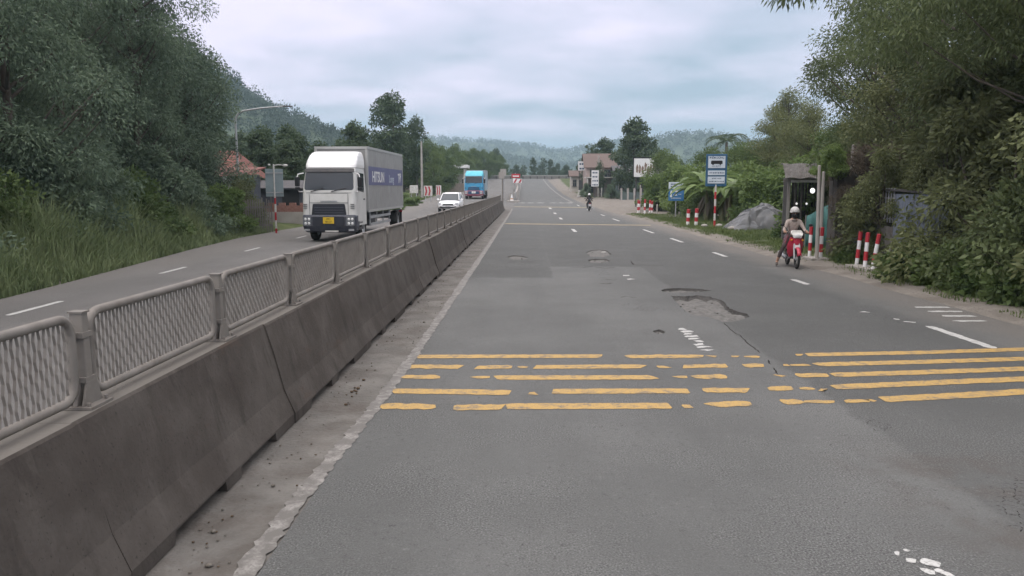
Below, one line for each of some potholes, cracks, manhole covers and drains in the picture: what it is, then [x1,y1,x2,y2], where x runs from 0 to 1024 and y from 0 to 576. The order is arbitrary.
crack [724,323,778,374]
pothole [671,295,749,322]
crack [997,478,1024,532]
